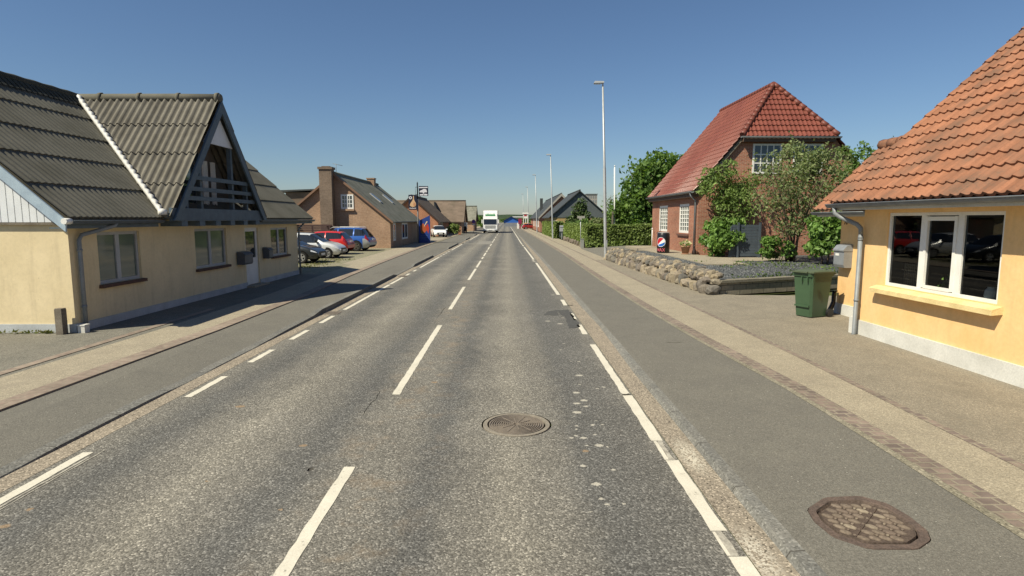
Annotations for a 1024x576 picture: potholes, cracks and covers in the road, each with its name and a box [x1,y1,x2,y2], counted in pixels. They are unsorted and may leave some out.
manhole cover [482,413,551,437]
manhole cover [808,496,930,550]
